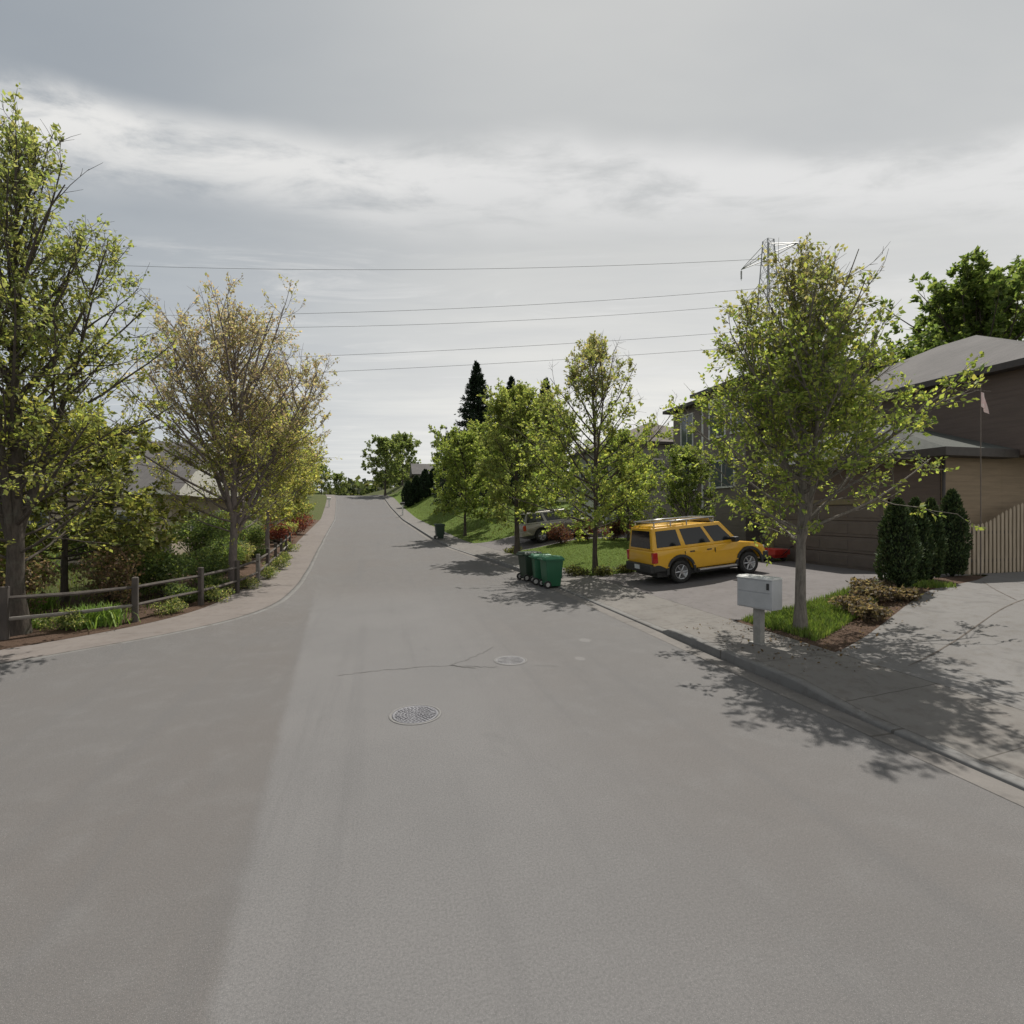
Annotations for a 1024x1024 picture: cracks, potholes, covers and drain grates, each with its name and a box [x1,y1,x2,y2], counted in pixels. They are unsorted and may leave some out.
manhole cover [494,655,527,665]
crack [338,648,539,676]
manhole cover [388,704,442,725]
